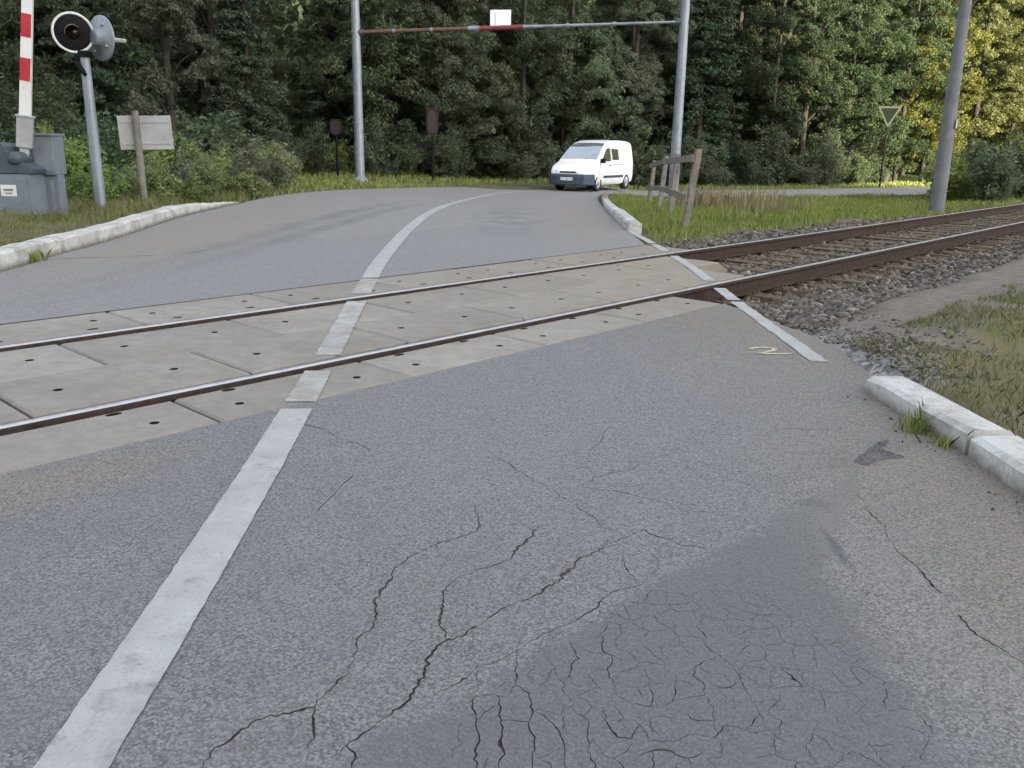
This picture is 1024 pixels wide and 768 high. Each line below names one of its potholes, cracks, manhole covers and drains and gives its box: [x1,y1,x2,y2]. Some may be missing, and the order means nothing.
crack [860,505,954,597]
crack [957,614,1024,664]
crack [201,457,934,768]
